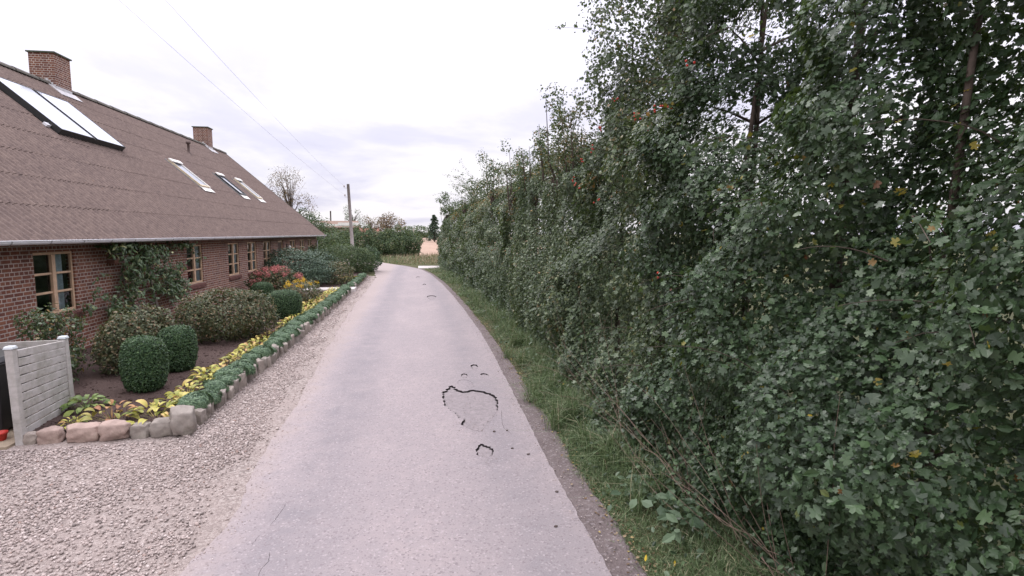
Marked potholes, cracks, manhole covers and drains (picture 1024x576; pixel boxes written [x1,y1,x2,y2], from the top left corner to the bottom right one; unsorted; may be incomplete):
pothole [475,444,494,457]
pothole [442,386,498,432]
